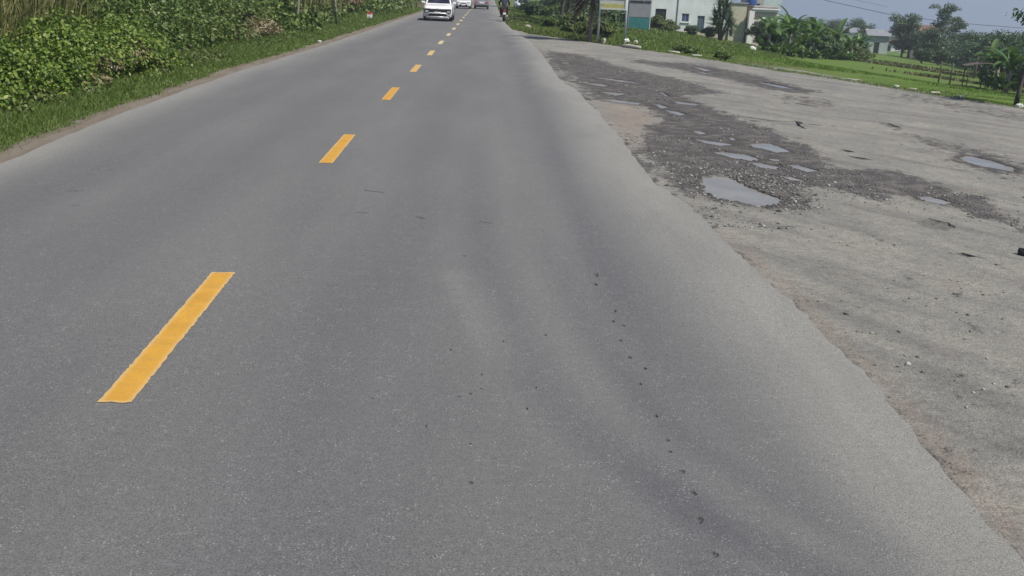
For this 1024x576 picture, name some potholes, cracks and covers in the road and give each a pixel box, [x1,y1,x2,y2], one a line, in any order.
pothole [699,174,785,206]
pothole [959,155,1020,172]
pothole [694,138,732,146]
pothole [713,151,758,161]
pothole [747,143,791,153]
pothole [918,196,951,204]
